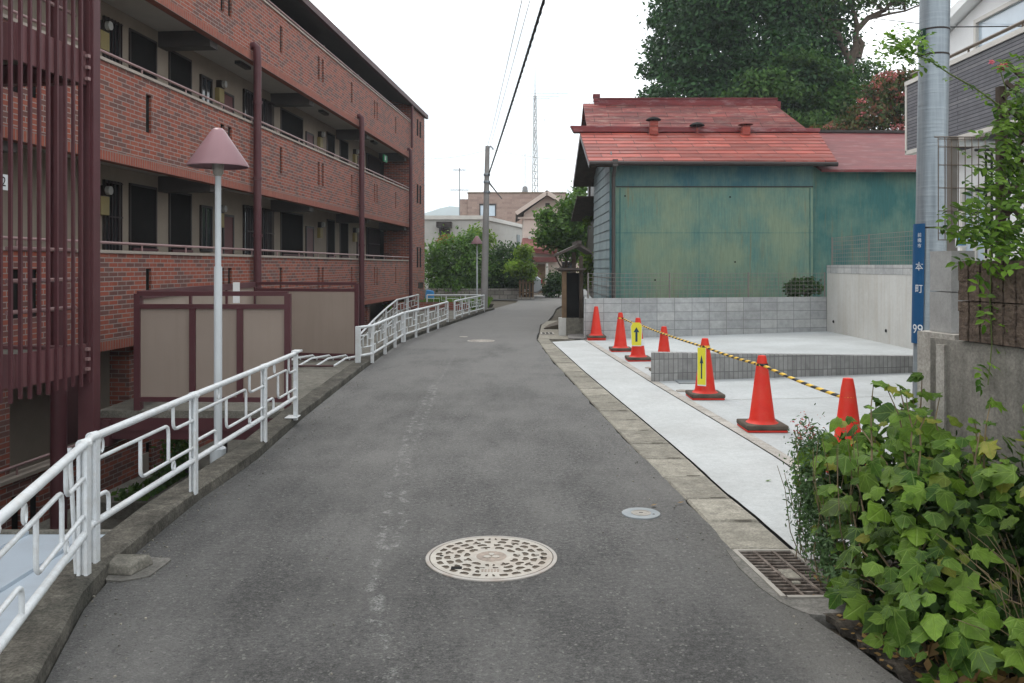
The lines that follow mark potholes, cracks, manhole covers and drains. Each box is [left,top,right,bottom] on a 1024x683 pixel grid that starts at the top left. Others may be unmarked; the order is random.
manhole cover [425,536,557,582]
utility cover [622,507,660,520]
drain grate [732,549,833,599]
